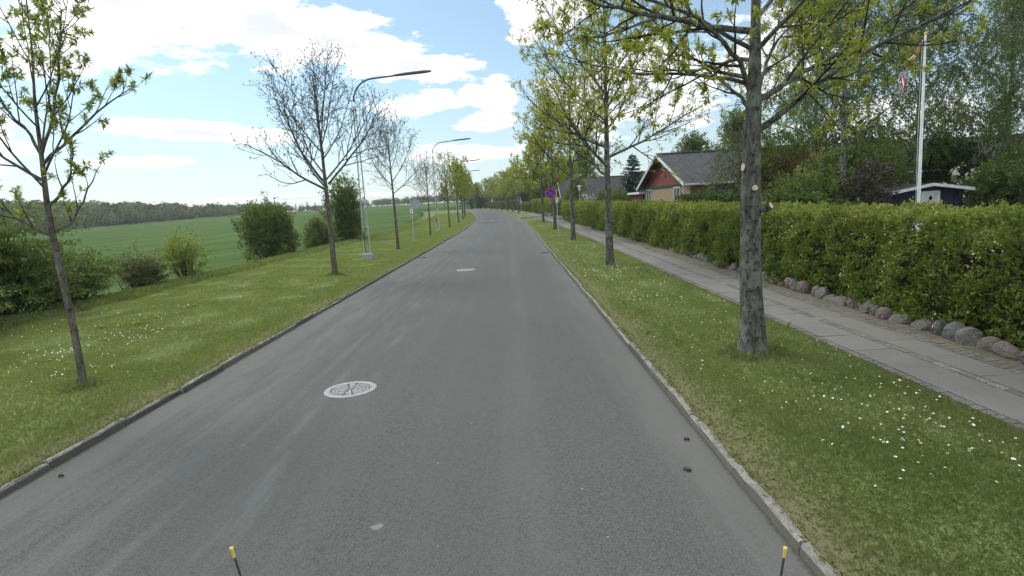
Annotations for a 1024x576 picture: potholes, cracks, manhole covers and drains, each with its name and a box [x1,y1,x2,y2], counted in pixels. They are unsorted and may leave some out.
manhole cover [324,381,377,398]
